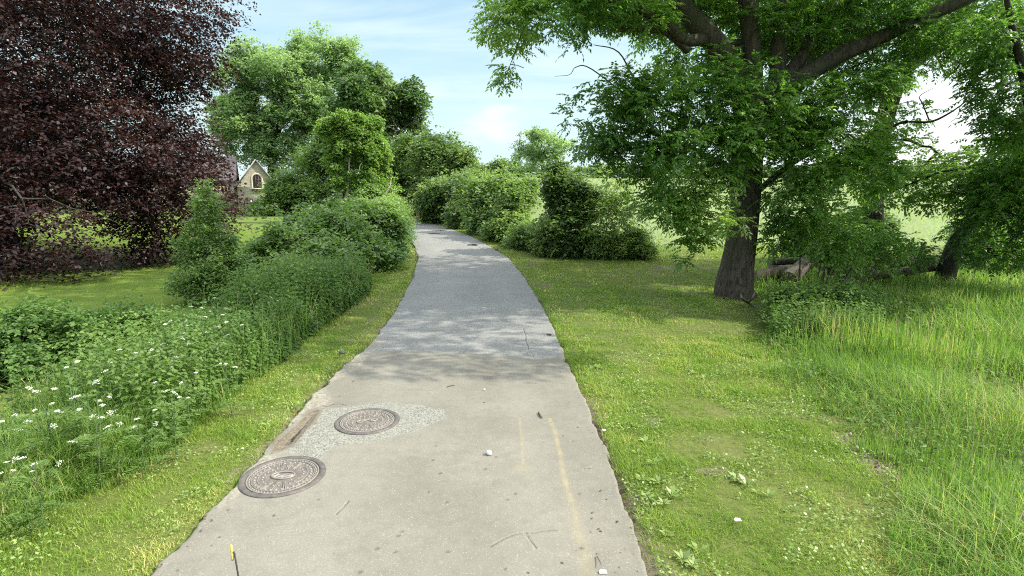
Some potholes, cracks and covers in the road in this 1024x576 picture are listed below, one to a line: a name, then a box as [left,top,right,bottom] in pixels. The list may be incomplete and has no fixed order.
crack [521,328,536,358]
manhole cover [334,408,400,435]
manhole cover [238,456,326,498]
